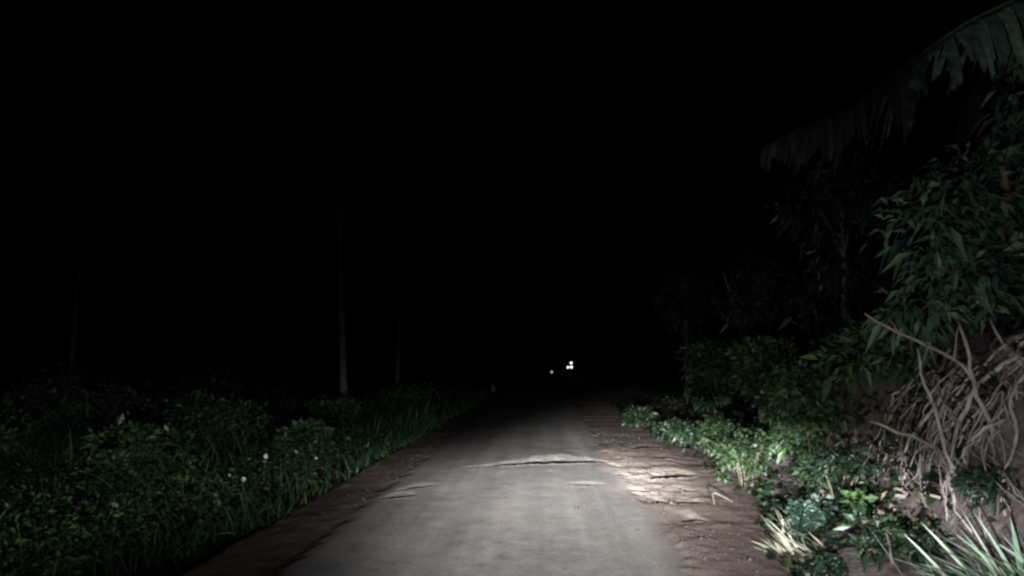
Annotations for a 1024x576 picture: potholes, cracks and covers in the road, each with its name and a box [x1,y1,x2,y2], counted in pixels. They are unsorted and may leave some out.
crack [446,450,650,493]
crack [650,459,681,467]
